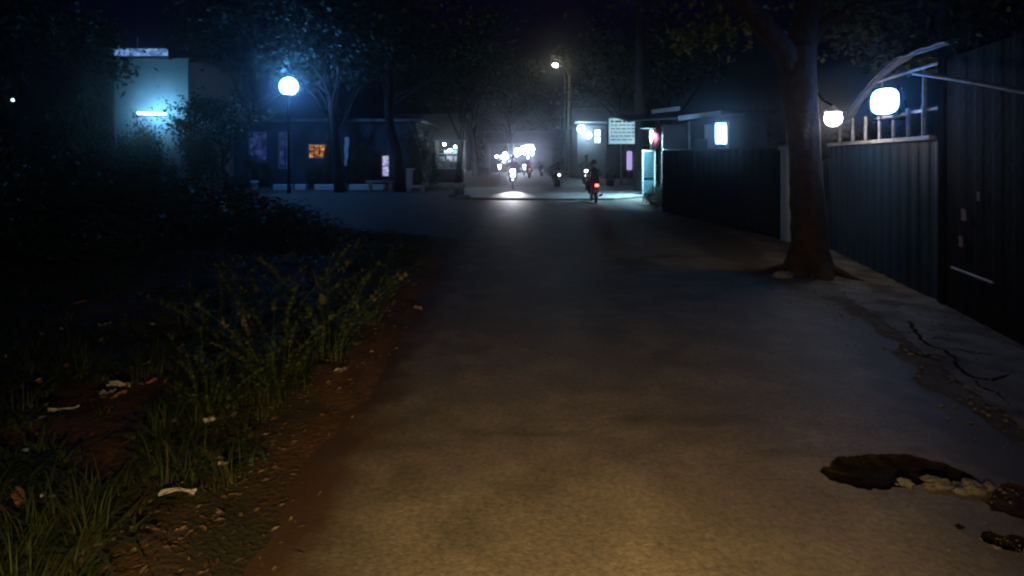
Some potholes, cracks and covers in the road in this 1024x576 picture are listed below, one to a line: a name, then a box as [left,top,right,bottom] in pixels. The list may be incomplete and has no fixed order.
pothole [979,531,1024,554]
crack [908,321,1009,400]
pothole [980,482,1024,521]
pothole [816,453,983,492]
